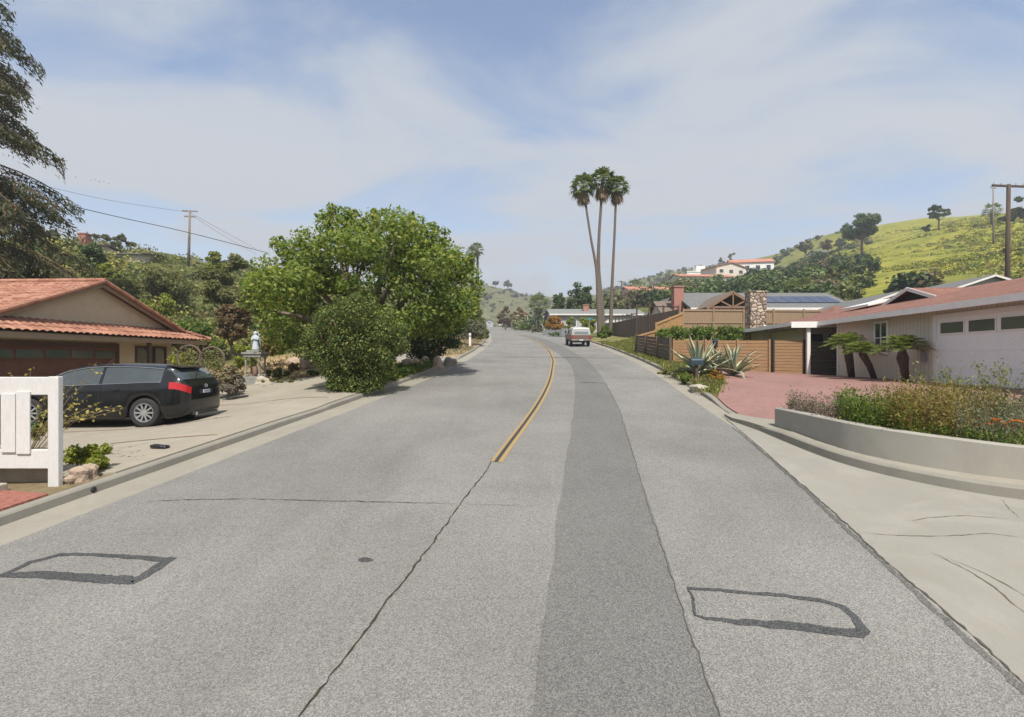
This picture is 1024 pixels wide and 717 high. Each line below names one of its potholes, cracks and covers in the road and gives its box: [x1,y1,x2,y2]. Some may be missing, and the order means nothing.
crack [160,459,520,717]
crack [934,553,1022,610]
crack [864,500,1019,537]
